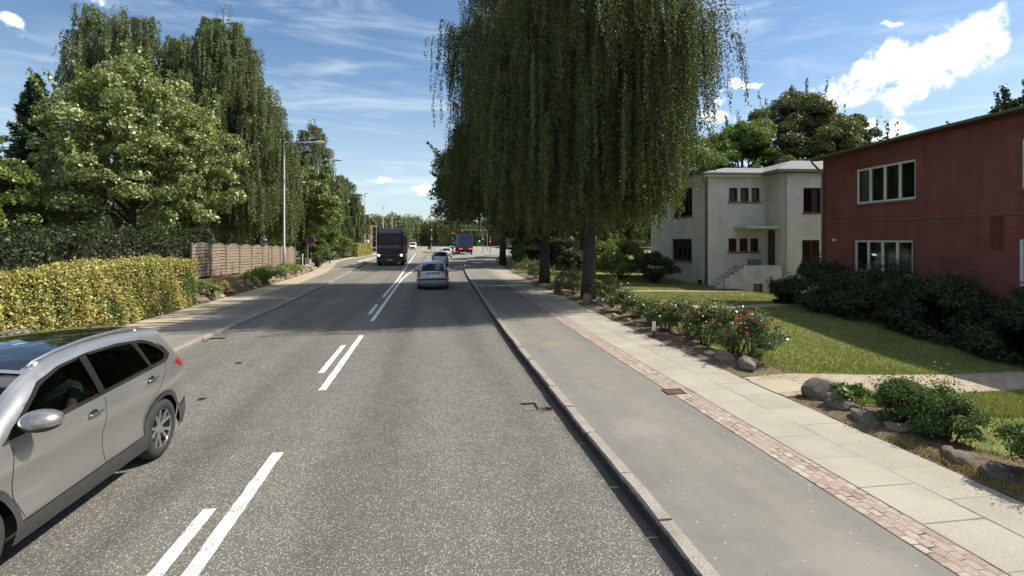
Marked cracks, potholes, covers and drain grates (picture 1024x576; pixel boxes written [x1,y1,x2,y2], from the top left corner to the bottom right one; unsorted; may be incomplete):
drain grate [519,402,542,411]
